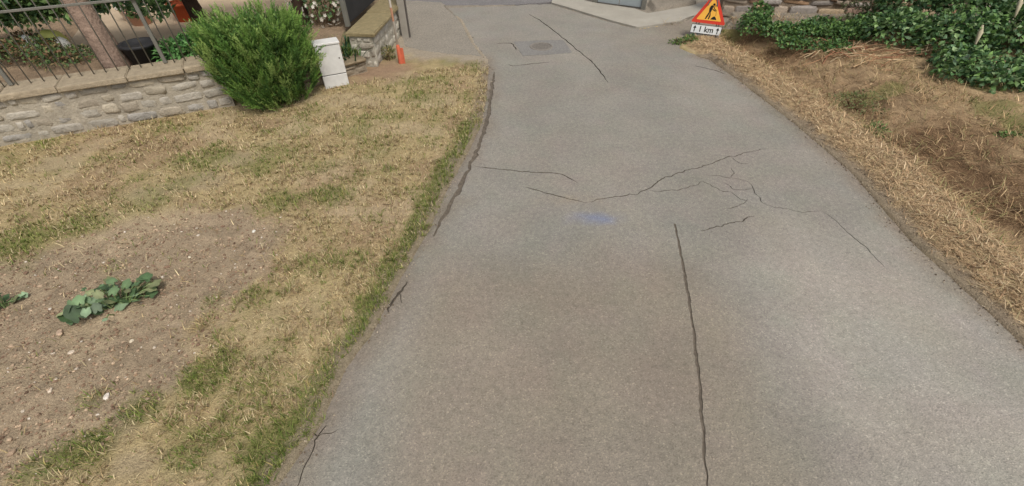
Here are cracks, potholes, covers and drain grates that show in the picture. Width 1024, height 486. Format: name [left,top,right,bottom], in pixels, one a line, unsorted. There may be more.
crack [387,282,407,312]
crack [674,216,754,486]
manhole cover [530,42,553,51]
crack [298,425,337,485]
crack [476,149,870,252]
crack [534,17,606,80]
